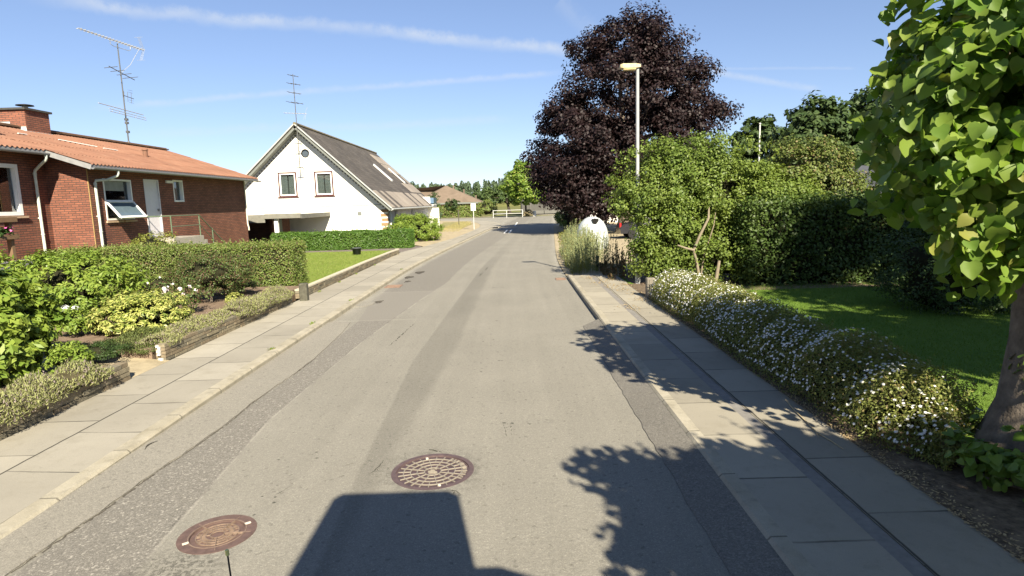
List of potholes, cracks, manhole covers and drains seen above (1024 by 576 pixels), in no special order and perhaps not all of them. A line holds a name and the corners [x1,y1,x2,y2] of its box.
manhole cover [391,454,474,490]
manhole cover [176,515,257,555]
